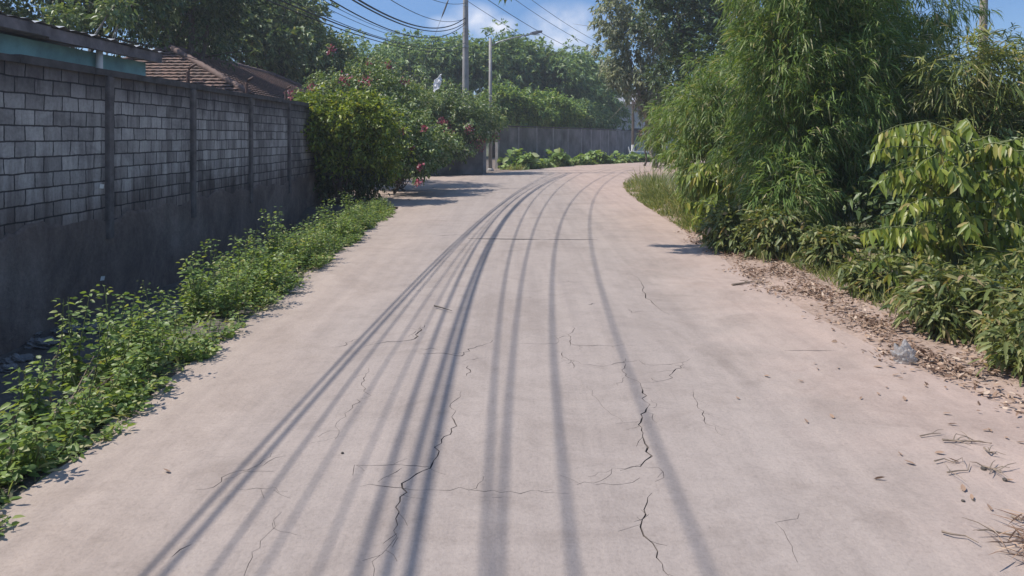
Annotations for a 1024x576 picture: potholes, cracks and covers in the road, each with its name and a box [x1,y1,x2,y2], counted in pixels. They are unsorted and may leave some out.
crack [353,390,565,576]
crack [524,328,688,485]
crack [196,455,286,497]
crack [339,325,493,376]
crack [620,493,672,576]
